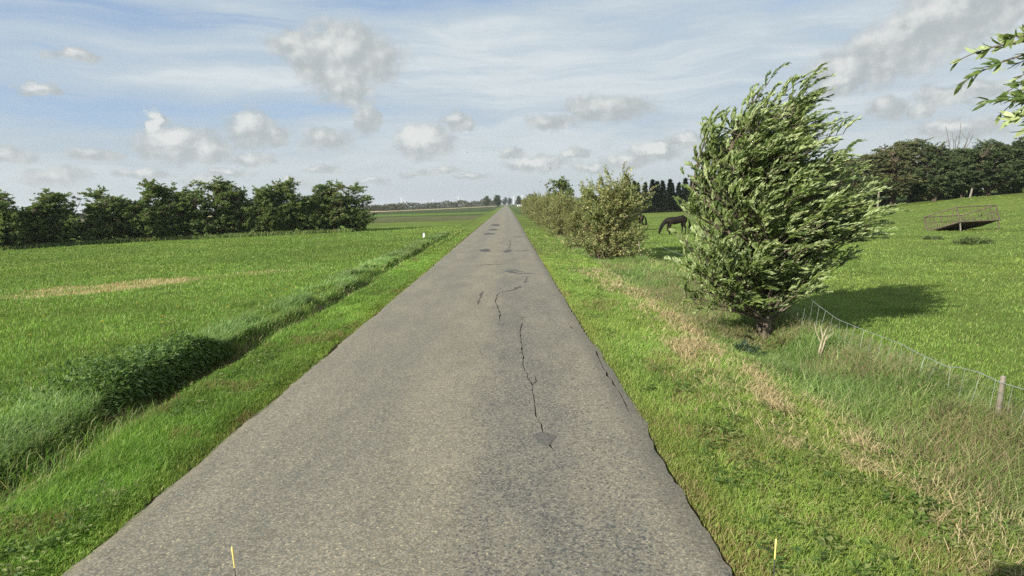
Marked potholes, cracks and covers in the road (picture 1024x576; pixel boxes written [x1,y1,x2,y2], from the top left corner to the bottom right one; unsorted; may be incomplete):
crack [596,351,630,426]
crack [477,236,531,319]
crack [520,317,553,449]
